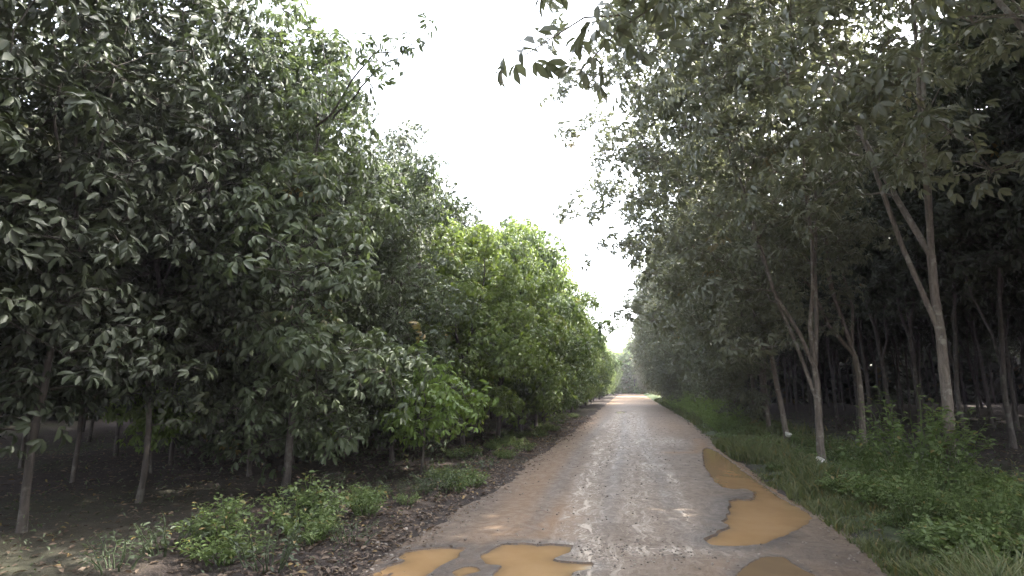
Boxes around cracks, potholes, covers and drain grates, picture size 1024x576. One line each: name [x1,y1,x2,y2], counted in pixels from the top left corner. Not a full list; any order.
pothole [702,447,813,546]
pothole [480,542,594,576]
pothole [368,546,467,576]
pothole [734,556,816,576]
